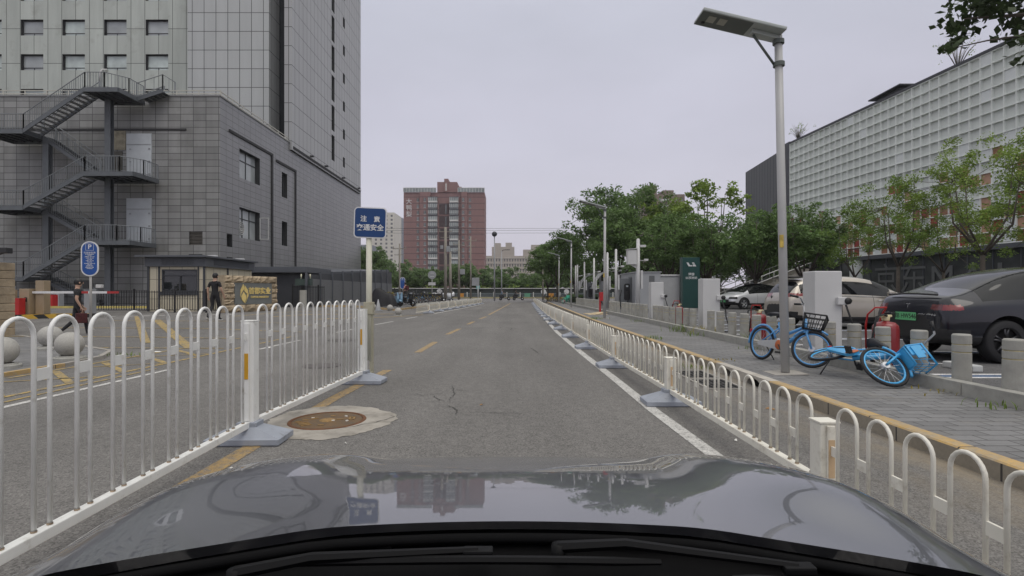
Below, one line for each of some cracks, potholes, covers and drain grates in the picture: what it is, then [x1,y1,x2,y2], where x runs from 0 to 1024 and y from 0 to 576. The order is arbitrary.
drain grate [690,379,747,390]
manhole cover [267,406,398,440]
drain grate [676,370,722,379]
